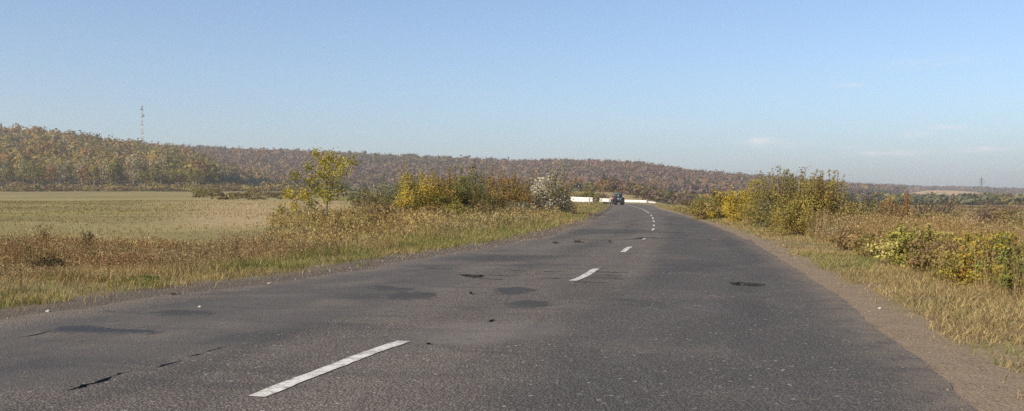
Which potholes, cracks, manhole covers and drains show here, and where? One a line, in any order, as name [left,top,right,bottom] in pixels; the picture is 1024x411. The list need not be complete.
crack [67,371,130,391]
crack [150,345,230,369]
